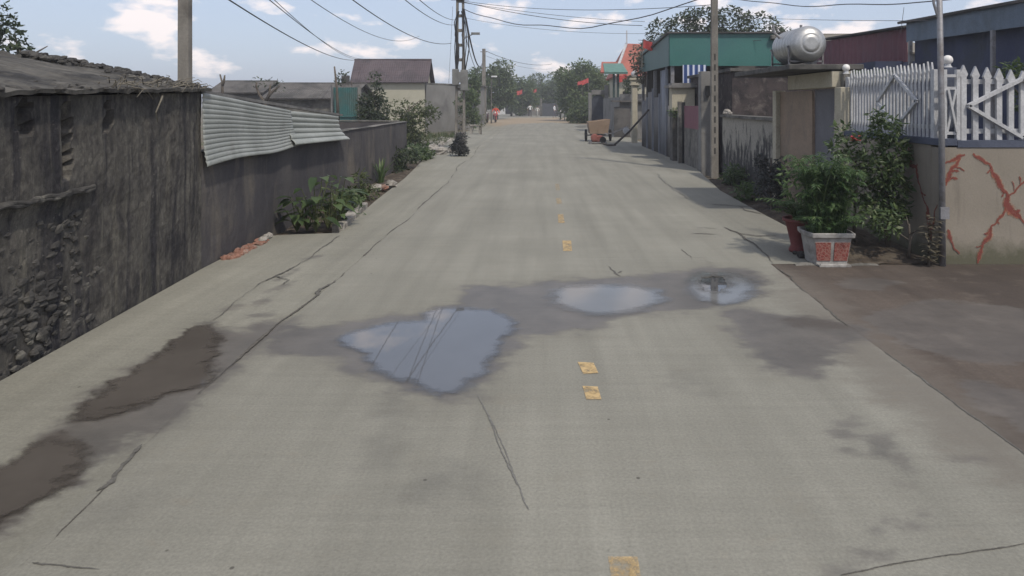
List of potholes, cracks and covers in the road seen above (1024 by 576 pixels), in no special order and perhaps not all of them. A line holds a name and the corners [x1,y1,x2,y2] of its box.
crack [21,134,498,565]
pothole [698,276,727,292]
crack [841,543,1024,575]
crack [478,396,529,509]
